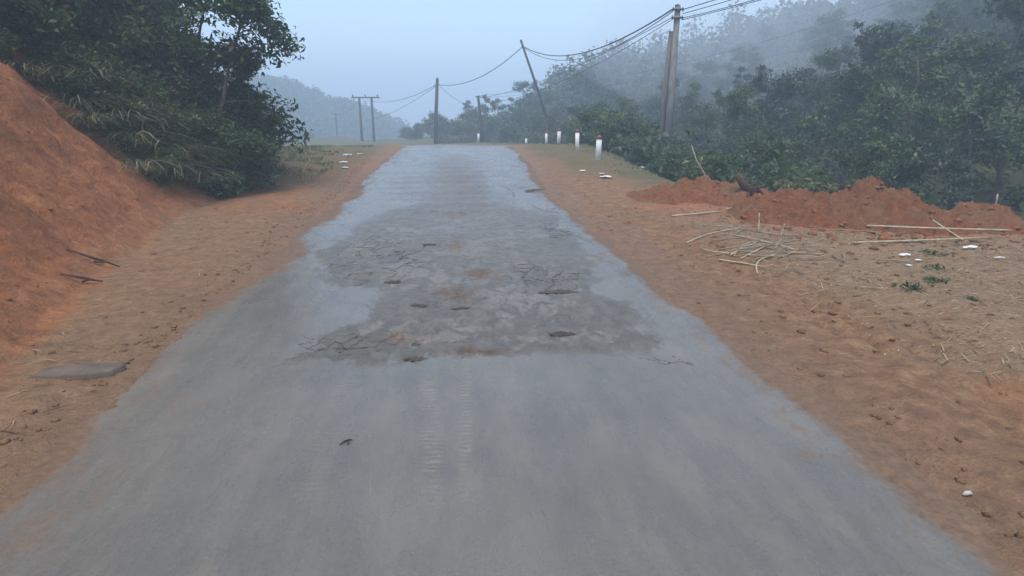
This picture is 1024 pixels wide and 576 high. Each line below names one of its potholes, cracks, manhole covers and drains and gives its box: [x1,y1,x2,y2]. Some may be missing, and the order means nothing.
crack [509,264,582,294]
crack [331,236,427,286]
crack [298,334,462,356]
